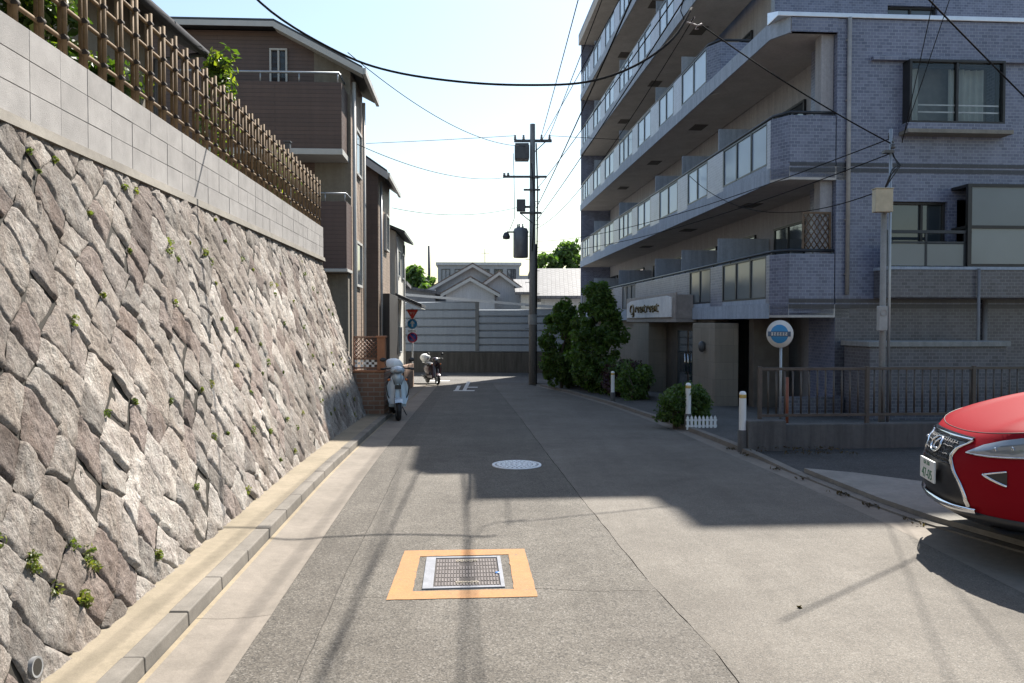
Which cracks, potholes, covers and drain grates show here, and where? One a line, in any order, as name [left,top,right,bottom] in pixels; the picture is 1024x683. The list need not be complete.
manhole cover [422,556,505,590]
manhole cover [492,460,541,469]
